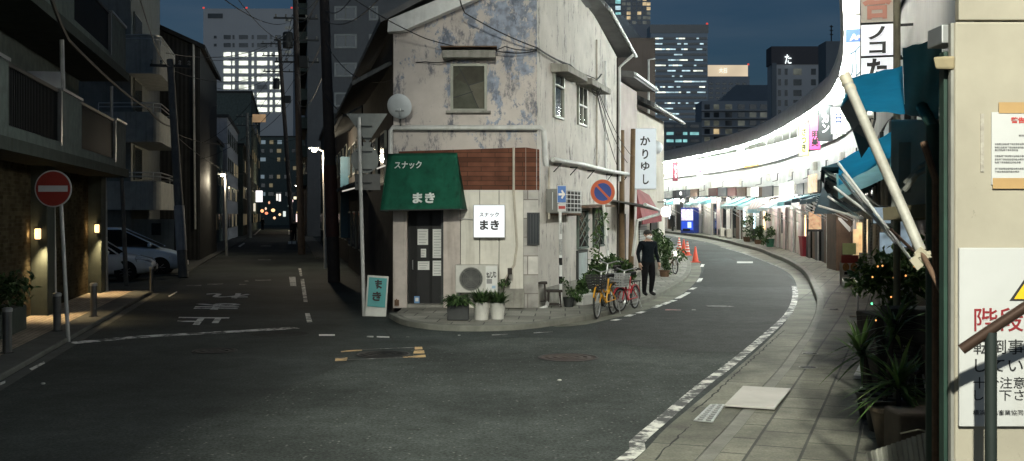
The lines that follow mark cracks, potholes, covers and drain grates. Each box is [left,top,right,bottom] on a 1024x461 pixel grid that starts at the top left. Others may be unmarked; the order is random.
manhole cover [538,353,599,362]
manhole cover [356,350,410,358]
drain grate [694,404,725,423]
crack [655,424,692,460]
